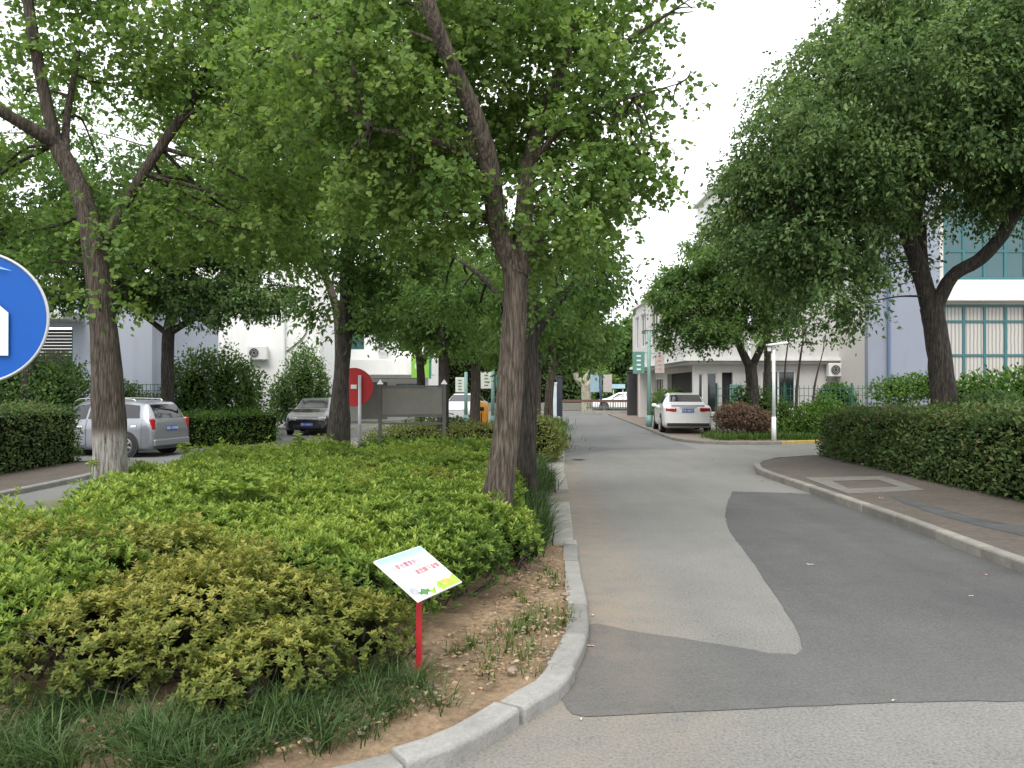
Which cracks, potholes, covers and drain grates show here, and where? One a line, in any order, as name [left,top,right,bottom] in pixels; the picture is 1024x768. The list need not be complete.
manhole cover [804,476,924,494]
